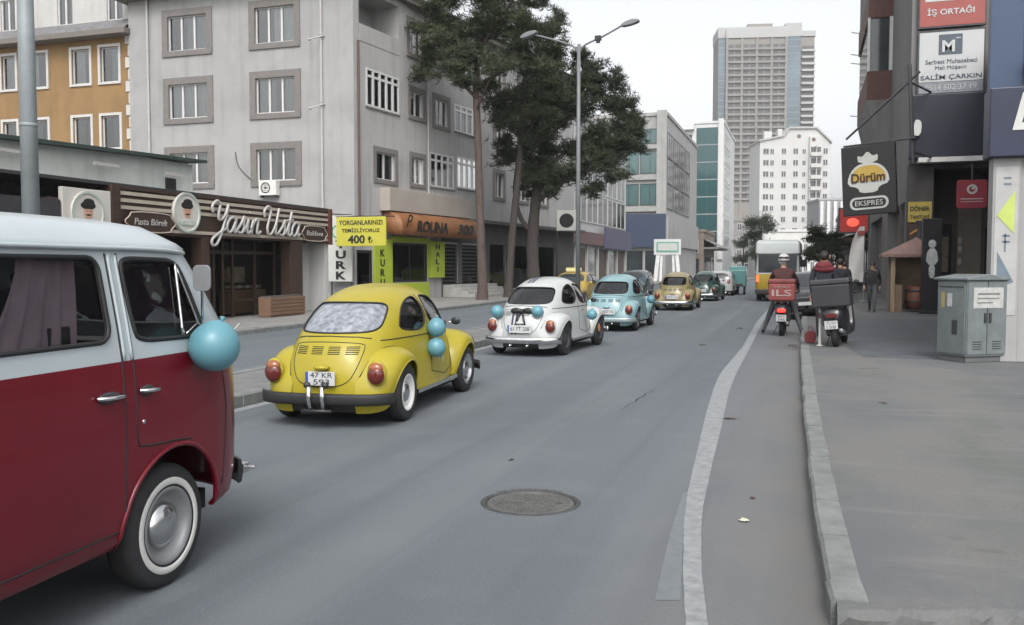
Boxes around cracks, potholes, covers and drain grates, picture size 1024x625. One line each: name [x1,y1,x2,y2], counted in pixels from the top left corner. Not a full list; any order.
manhole cover [481,488,581,516]
